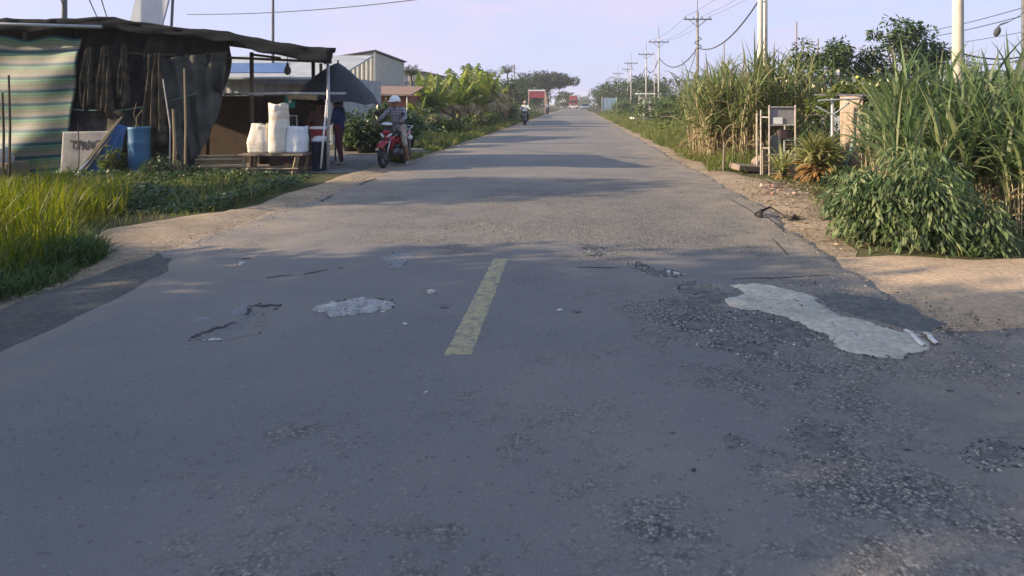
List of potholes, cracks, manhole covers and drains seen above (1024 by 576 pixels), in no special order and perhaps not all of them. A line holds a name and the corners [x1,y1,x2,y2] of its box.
crack [190,304,281,338]
